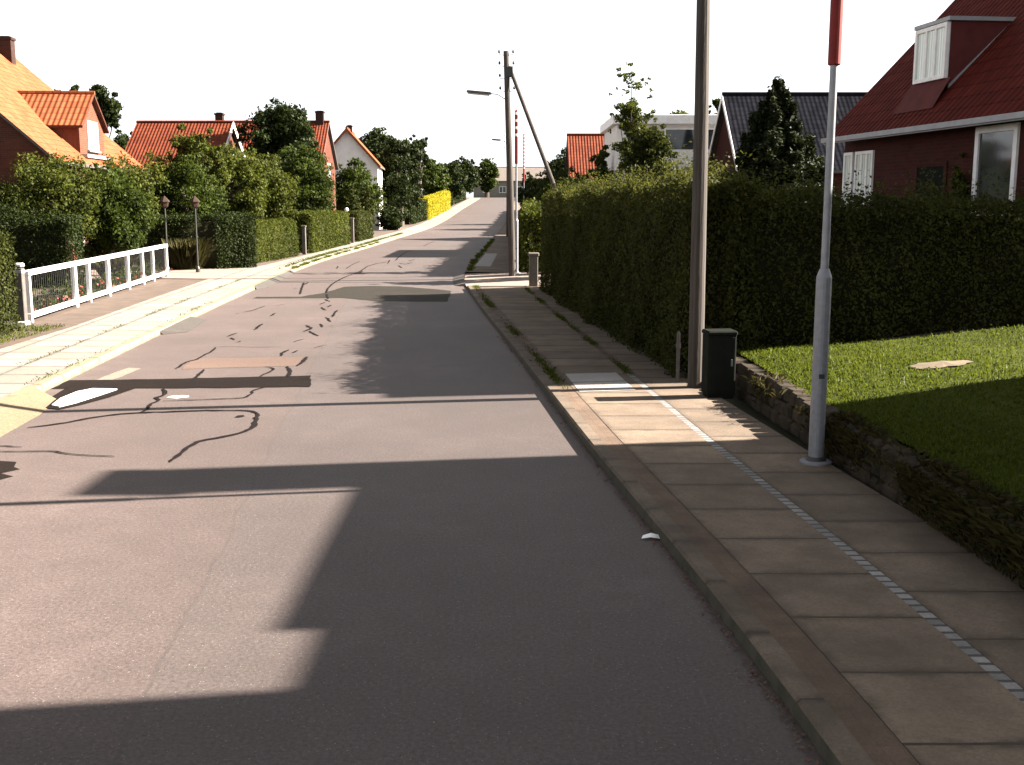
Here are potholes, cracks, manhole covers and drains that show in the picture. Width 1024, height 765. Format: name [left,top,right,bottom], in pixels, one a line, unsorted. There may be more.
crack [0,445,107,456]
crack [139,243,429,413]
